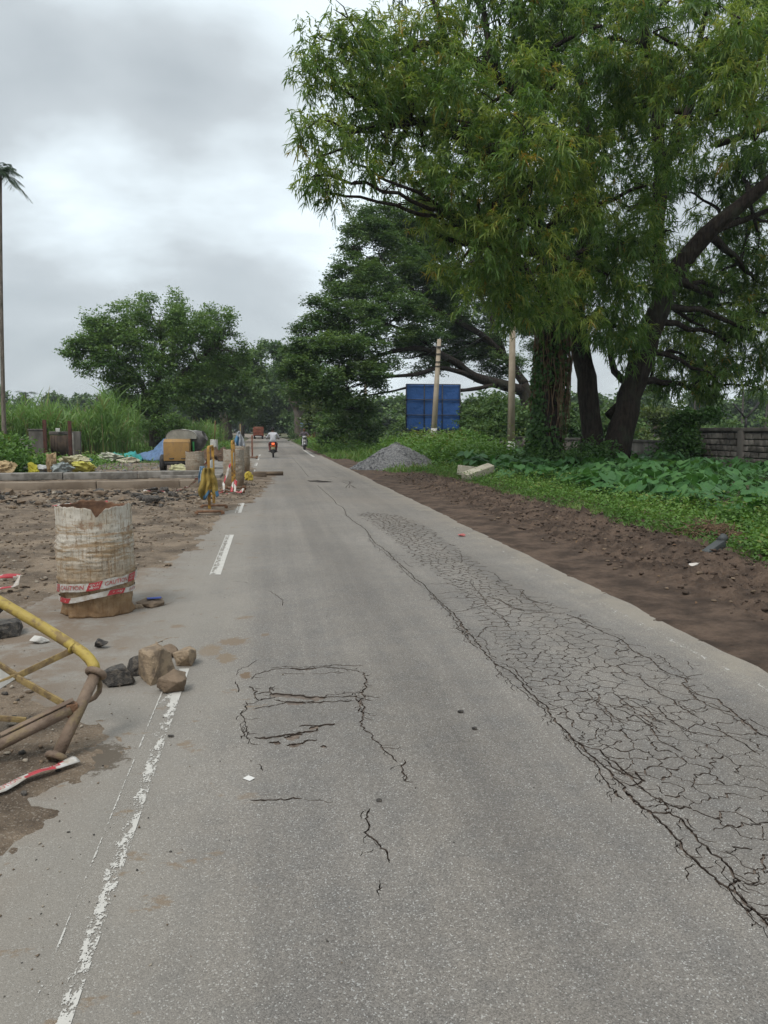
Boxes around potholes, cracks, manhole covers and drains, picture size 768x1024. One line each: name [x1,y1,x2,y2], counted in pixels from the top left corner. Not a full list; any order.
crack [360,809,390,895]
crack [235,660,409,782]
